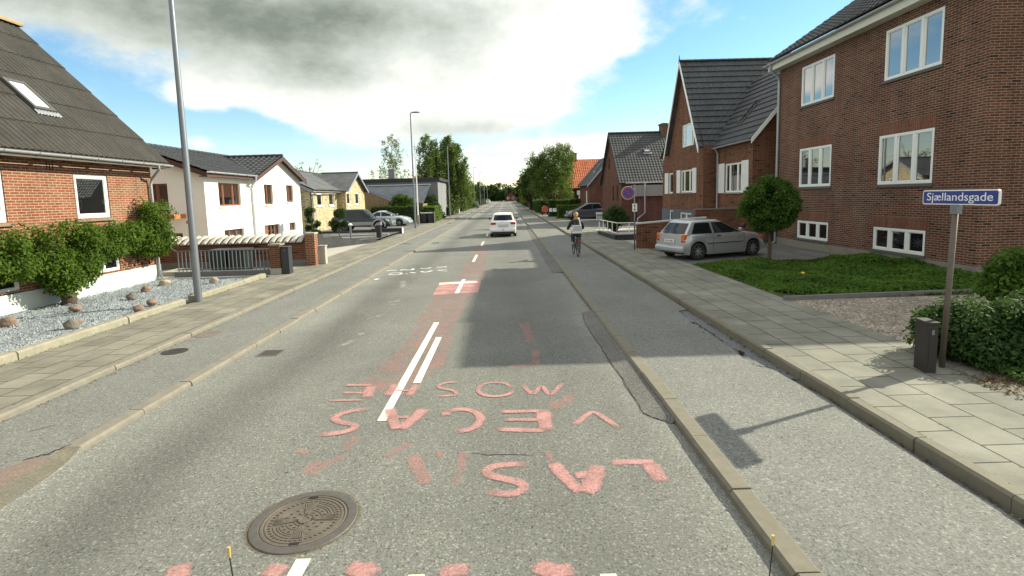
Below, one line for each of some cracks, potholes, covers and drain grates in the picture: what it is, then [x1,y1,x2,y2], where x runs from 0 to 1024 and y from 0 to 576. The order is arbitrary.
manhole cover [244,490,360,556]
